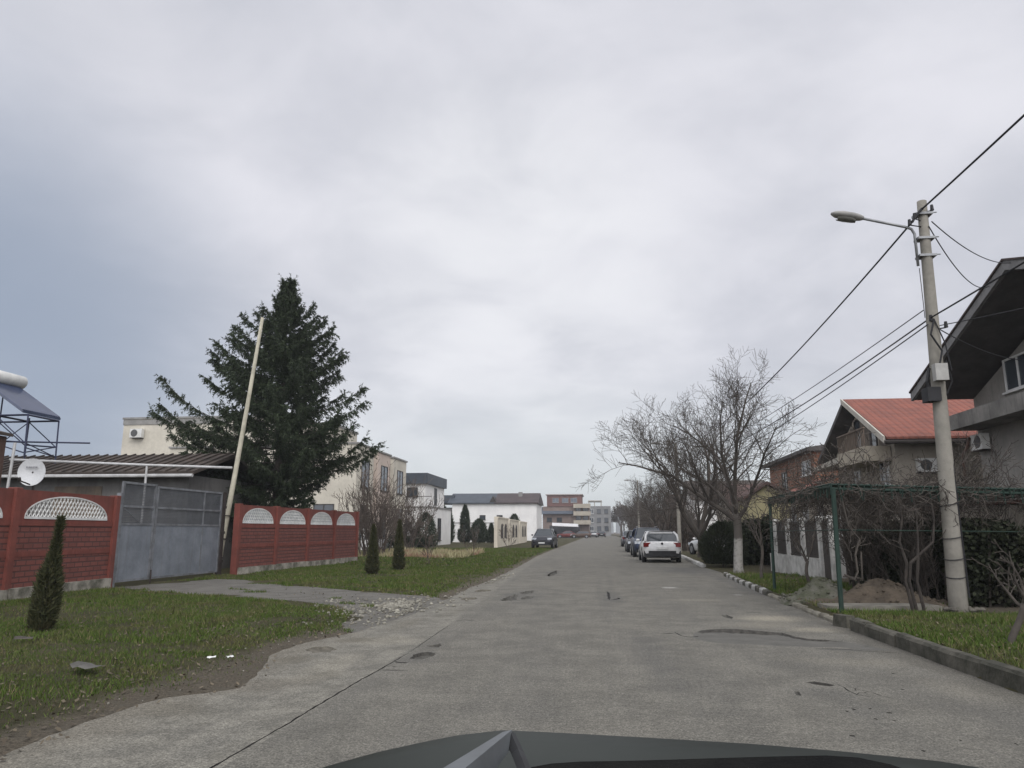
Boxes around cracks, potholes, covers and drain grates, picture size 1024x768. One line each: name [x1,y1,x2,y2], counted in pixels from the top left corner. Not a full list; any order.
pothole [410,652,435,660]
